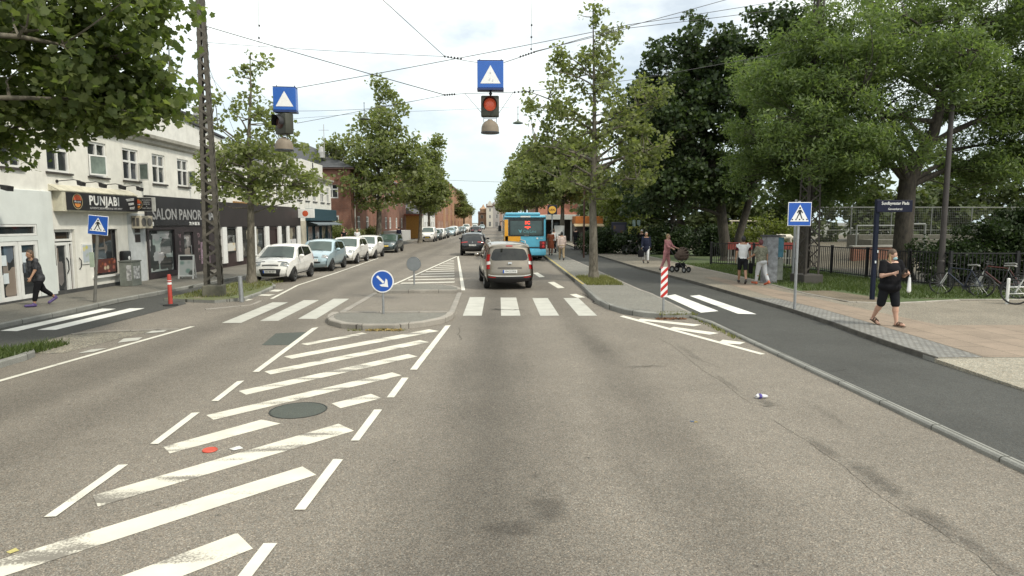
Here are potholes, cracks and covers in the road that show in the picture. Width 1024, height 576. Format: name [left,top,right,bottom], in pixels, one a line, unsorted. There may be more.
manhole cover [269,402,327,419]
